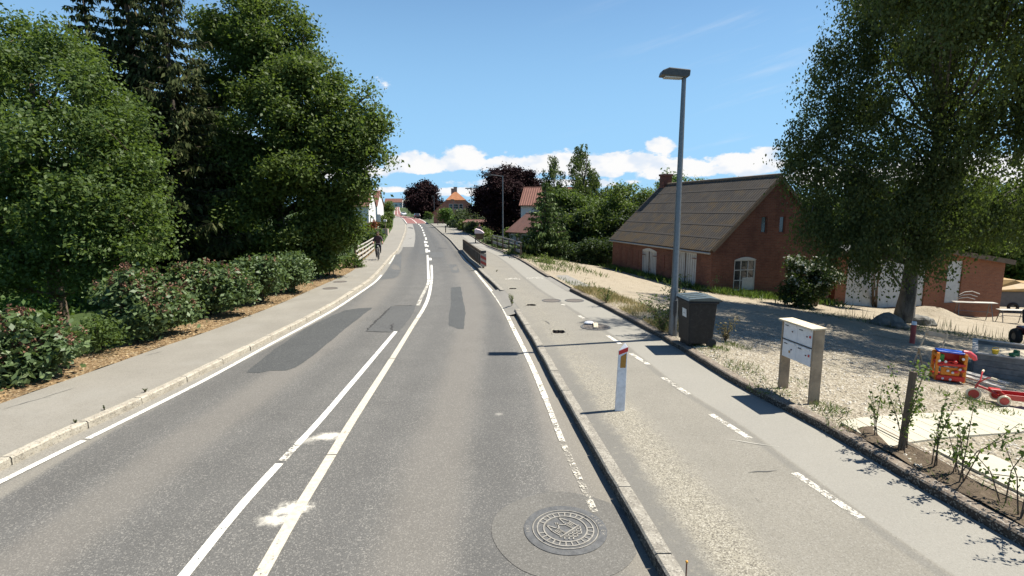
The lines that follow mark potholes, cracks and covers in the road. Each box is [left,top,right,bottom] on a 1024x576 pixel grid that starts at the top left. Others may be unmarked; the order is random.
manhole cover [524,506,607,556]
